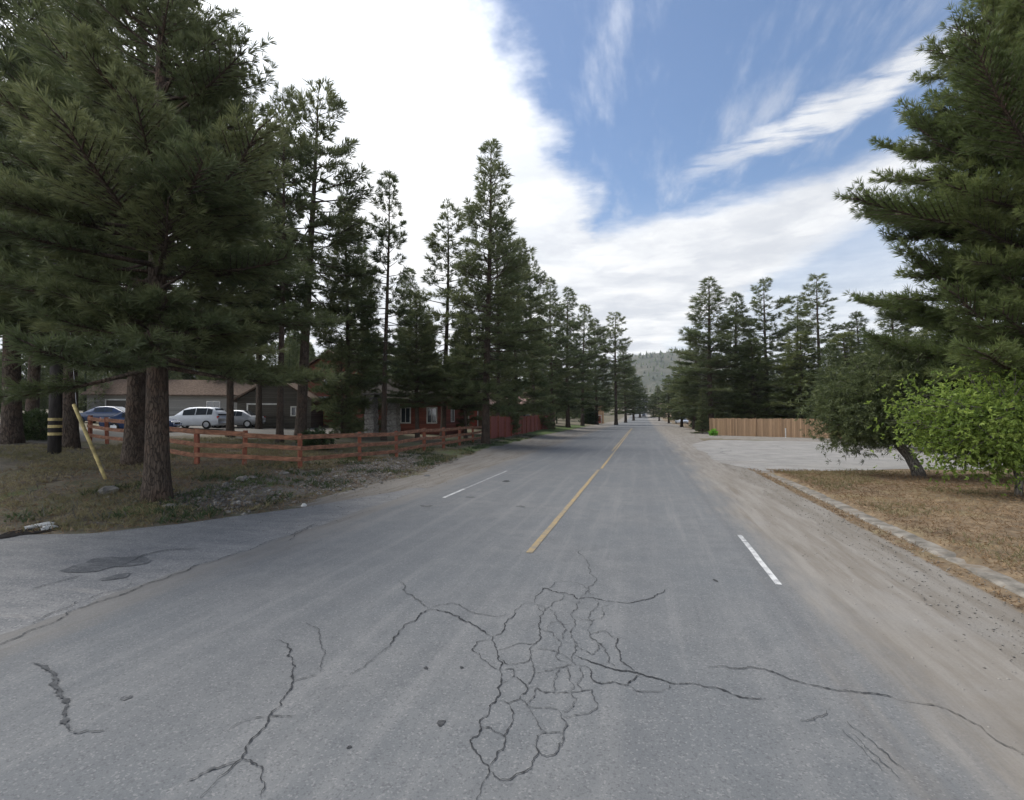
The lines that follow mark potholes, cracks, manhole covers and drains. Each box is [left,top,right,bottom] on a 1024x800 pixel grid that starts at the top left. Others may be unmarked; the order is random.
crack [709,665,1021,752]
crack [187,623,326,798]
crack [345,548,766,800]
crack [800,710,904,778]
crack [34,663,103,733]
